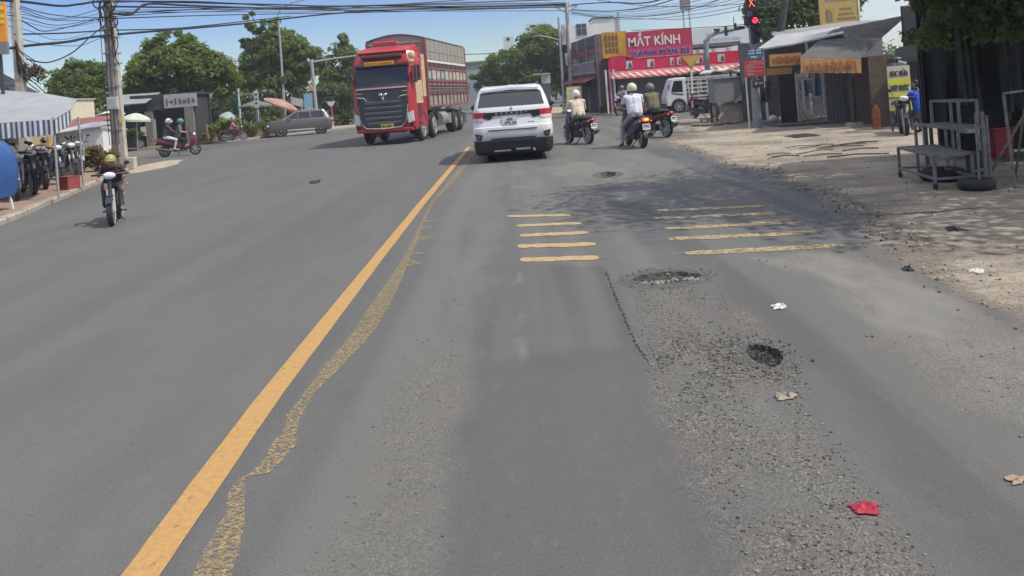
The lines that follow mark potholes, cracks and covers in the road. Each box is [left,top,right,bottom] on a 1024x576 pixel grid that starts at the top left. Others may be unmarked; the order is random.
pothole [615,267,718,289]
crack [604,270,655,365]
